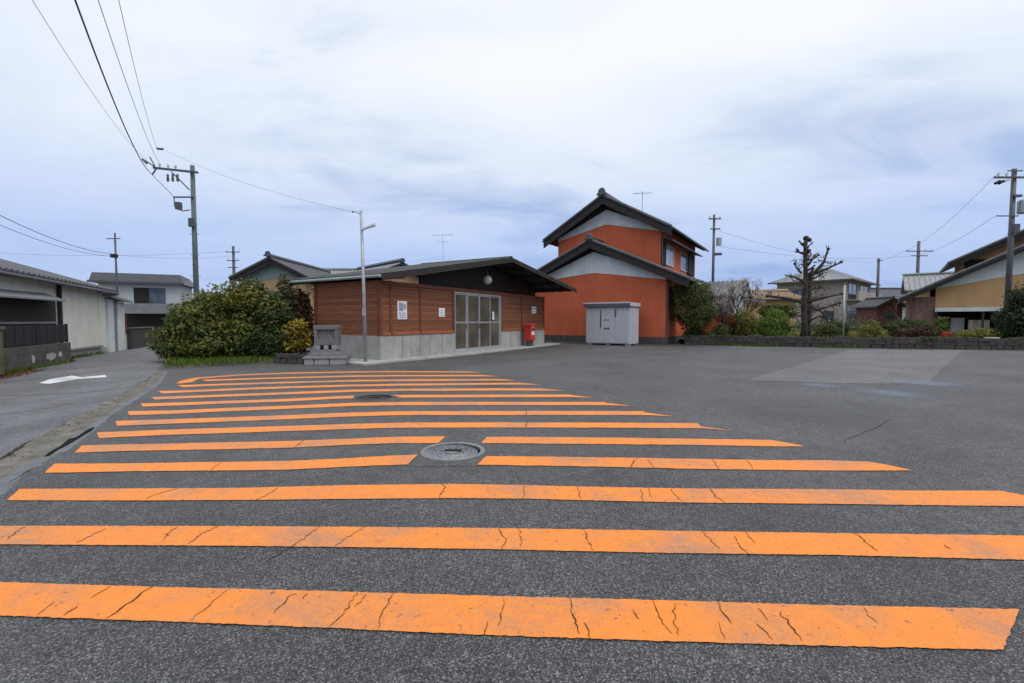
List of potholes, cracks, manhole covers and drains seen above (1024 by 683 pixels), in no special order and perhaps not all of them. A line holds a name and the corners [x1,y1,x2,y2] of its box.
crack [329,591,393,628]
crack [37,586,153,619]
manhole cover [420,442,485,460]
crack [633,601,679,635]
crack [756,608,801,640]
